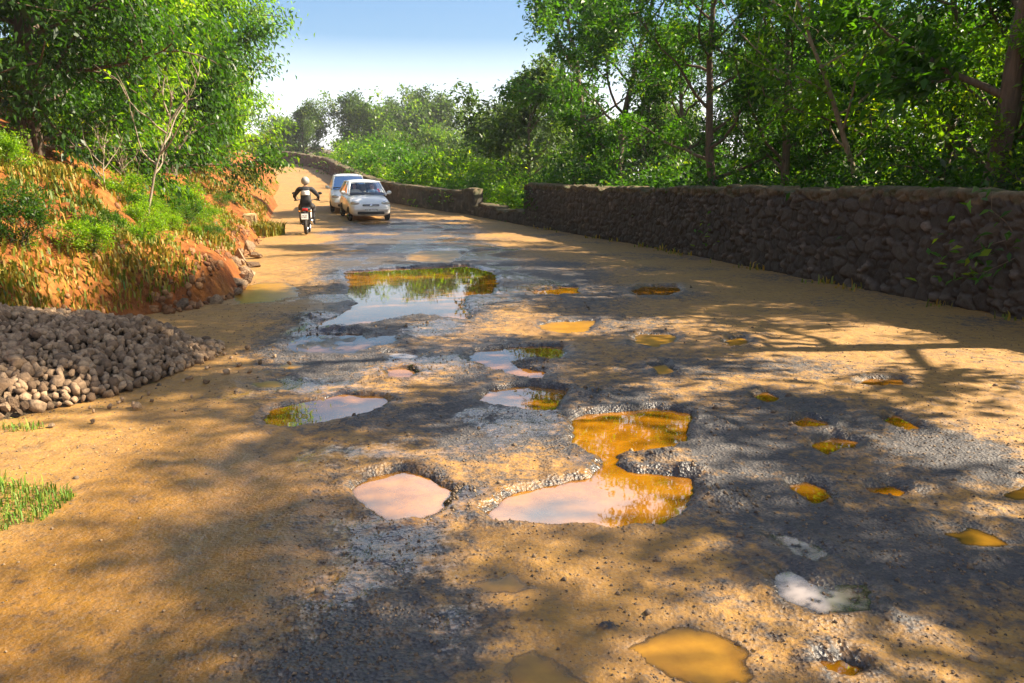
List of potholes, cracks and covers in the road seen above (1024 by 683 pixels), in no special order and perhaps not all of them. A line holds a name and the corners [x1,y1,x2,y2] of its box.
pothole [585,603,816,683]
pothole [526,283,587,295]
pothole [626,329,686,347]
pothole [342,459,462,521]
pothole [875,408,935,431]
pothole [473,402,708,529]
pothole [471,378,574,411]
pothole [458,341,576,379]
pothole [757,525,849,562]
pothole [307,263,506,328]
pothole [802,426,868,455]
pothole [379,363,425,377]
